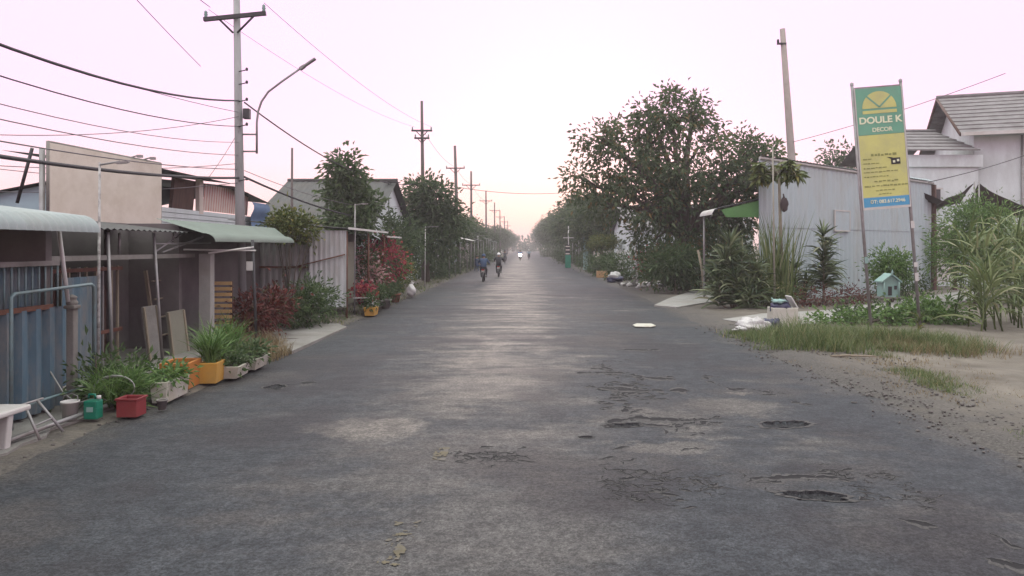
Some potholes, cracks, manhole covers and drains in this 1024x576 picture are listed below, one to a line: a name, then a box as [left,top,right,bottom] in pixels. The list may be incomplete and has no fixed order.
pothole [768,489,858,502]
crack [575,348,944,530]
pothole [755,420,817,429]
crack [448,446,534,468]
